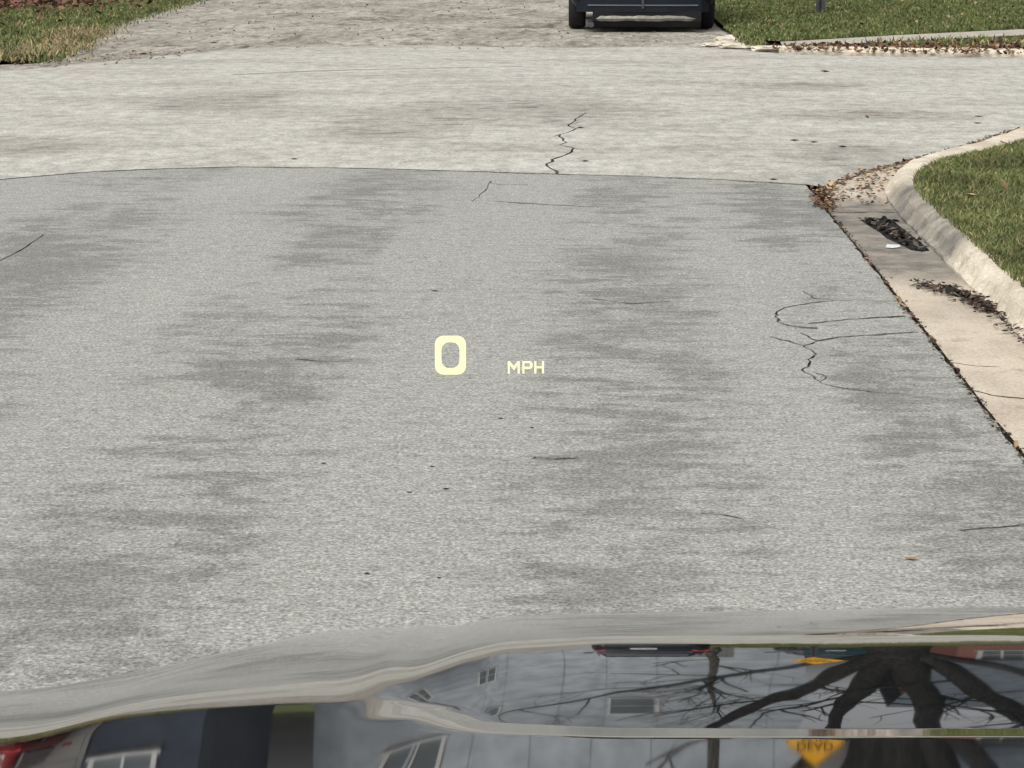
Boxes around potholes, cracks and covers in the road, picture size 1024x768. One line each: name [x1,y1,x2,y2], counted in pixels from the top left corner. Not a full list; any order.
crack [771,291,919,394]
crack [974,390,1024,399]
crack [545,113,586,174]
crack [472,181,589,207]
